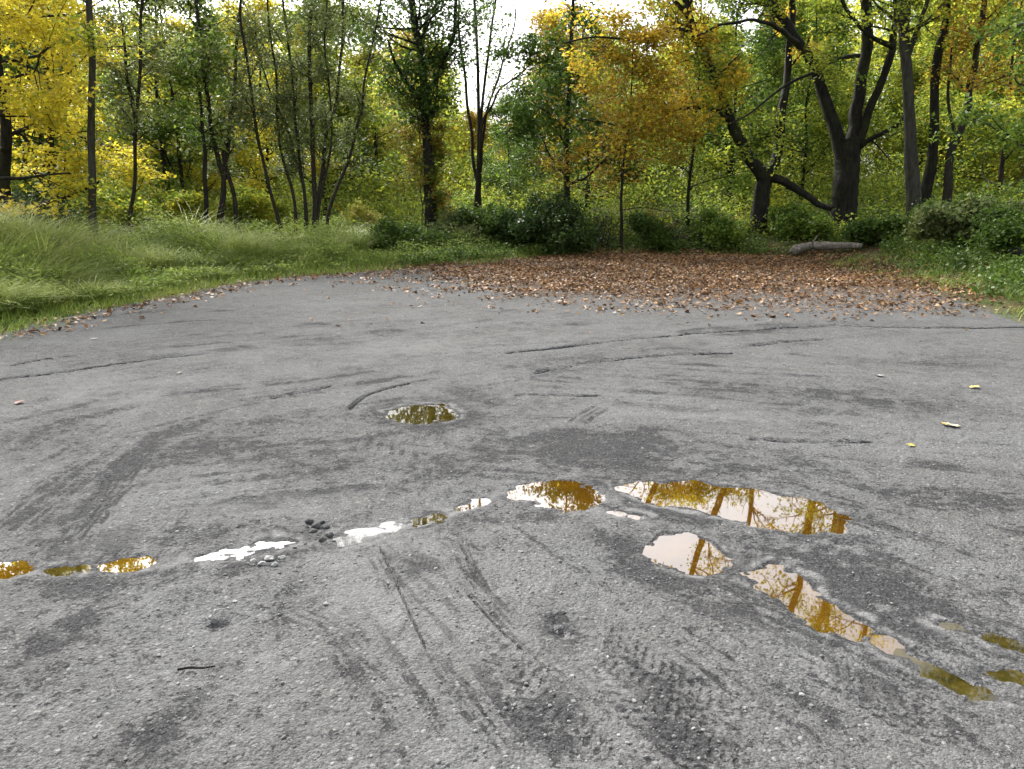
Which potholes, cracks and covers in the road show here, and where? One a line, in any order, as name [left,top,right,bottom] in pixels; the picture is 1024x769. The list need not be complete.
pothole [723,552,890,654]
pothole [404,505,465,536]
pothole [600,473,875,544]
pothole [952,620,1024,657]
pothole [886,648,1024,719]
pothole [309,512,428,554]
pothole [436,491,506,518]
pothole [0,551,56,588]
pothole [486,474,621,518]
pothole [177,527,320,572]
